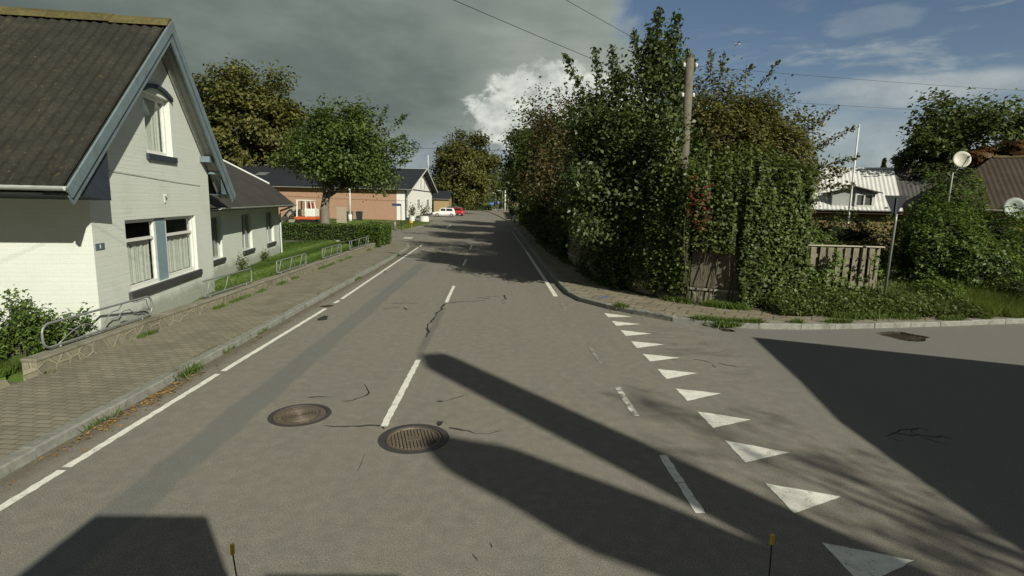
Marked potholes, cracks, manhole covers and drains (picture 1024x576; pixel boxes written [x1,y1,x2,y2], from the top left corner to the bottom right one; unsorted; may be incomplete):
pothole [876,331,930,342]
manhole cover [268,404,331,427]
crack [425,295,507,337]
crack [308,384,370,402]
crack [886,428,950,444]
